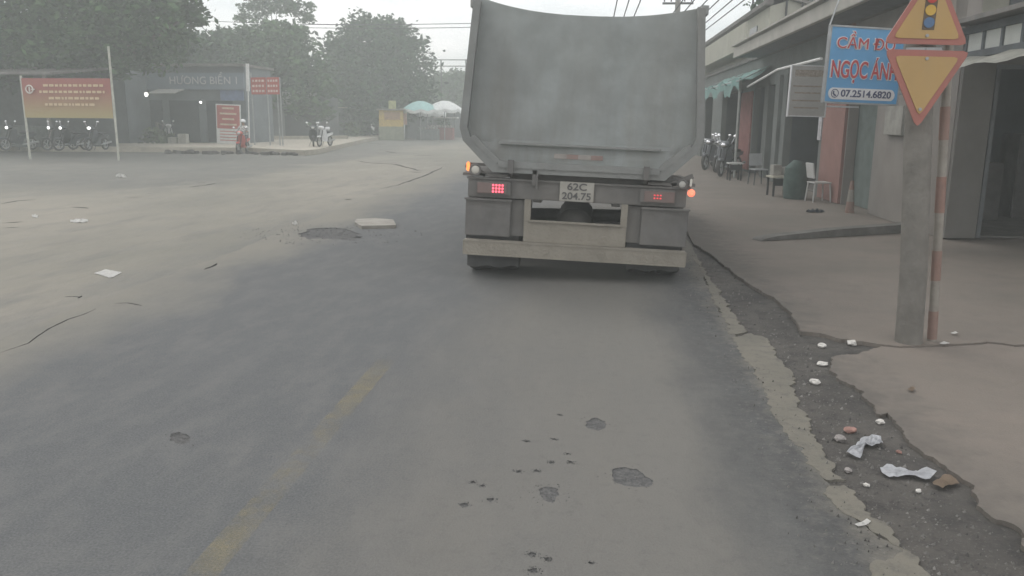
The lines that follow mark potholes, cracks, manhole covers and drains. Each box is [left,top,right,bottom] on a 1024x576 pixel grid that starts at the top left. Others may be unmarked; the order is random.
pothole [585,418,606,431]
pothole [539,487,559,503]
pothole [298,228,361,241]
pothole [170,432,190,444]
crack [3,296,95,352]
pothole [612,467,653,487]
crack [345,143,442,189]
